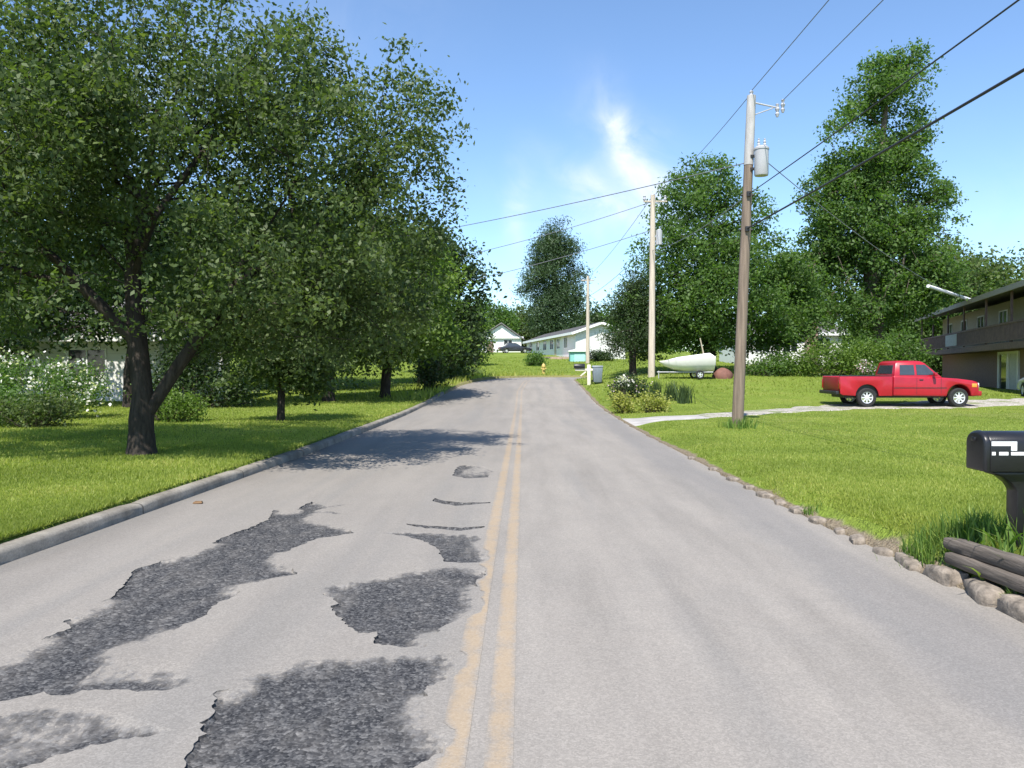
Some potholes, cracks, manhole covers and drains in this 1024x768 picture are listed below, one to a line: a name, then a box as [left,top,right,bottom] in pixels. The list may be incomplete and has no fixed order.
pothole [381,532,488,563]
pothole [0,502,353,701]
crack [433,498,490,506]
pothole [310,565,486,648]
pothole [453,465,497,478]
pothole [0,704,171,768]
pothole [184,650,465,768]
